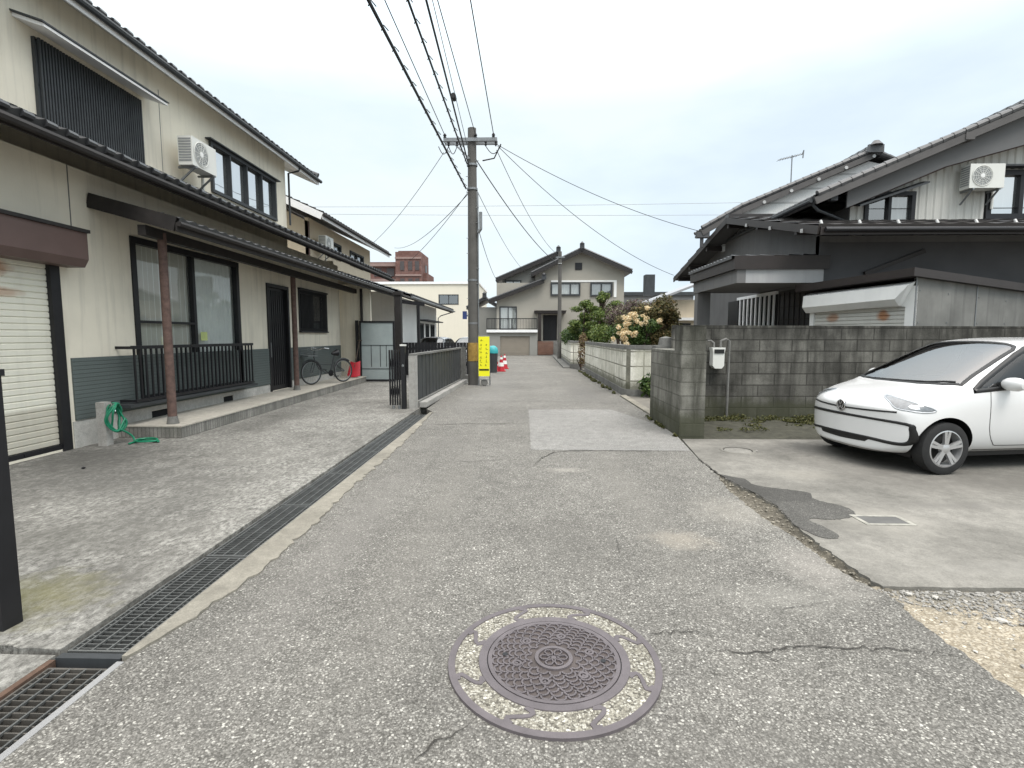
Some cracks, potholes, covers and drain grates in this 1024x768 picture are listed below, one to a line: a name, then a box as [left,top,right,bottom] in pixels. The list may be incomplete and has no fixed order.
drain grate [381,424,414,436]
crack [652,629,973,661]
drain grate [399,415,426,424]
manhole cover [719,447,757,455]
drain grate [280,474,351,506]
drain grate [358,436,399,452]
crack [536,450,652,463]
drain grate [206,506,311,558]
manhole cover [448,604,663,742]
drain grate [326,452,379,474]
drain grate [67,557,245,654]
drain grate [0,668,107,754]
